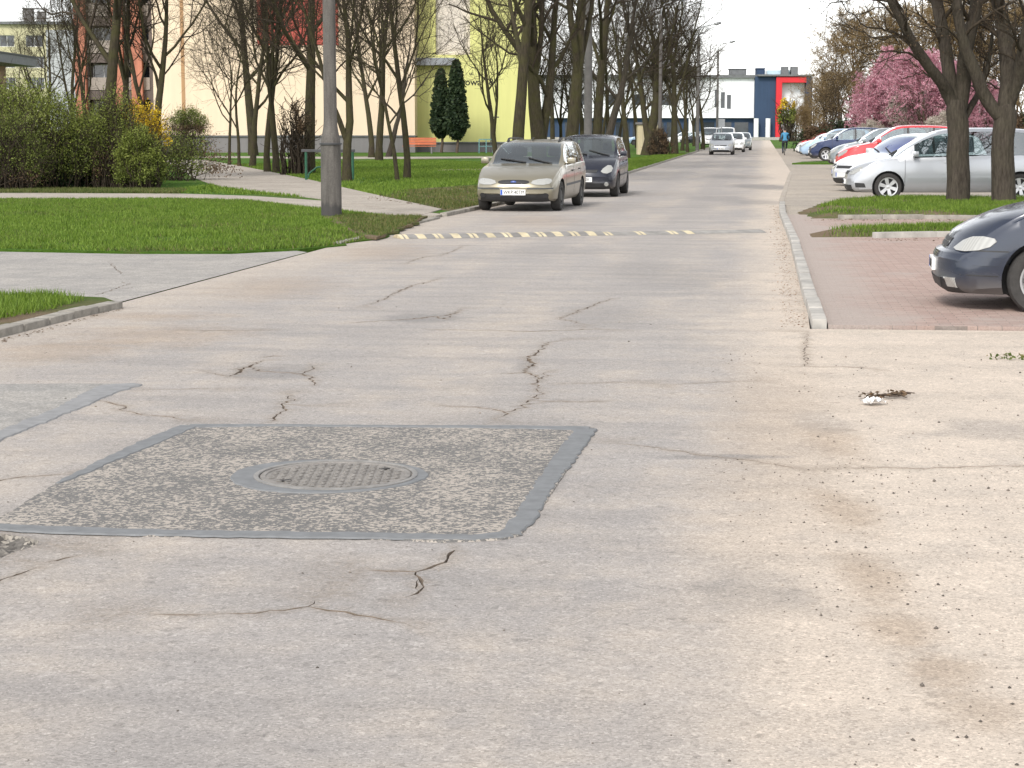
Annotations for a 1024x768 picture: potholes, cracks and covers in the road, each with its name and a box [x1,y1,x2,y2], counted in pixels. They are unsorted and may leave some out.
crack [453,299,610,418]
crack [159,550,454,623]
manhole cover [253,460,418,490]
crack [105,401,178,419]
crack [272,394,306,421]
crack [628,444,1019,469]
crack [215,356,316,385]
